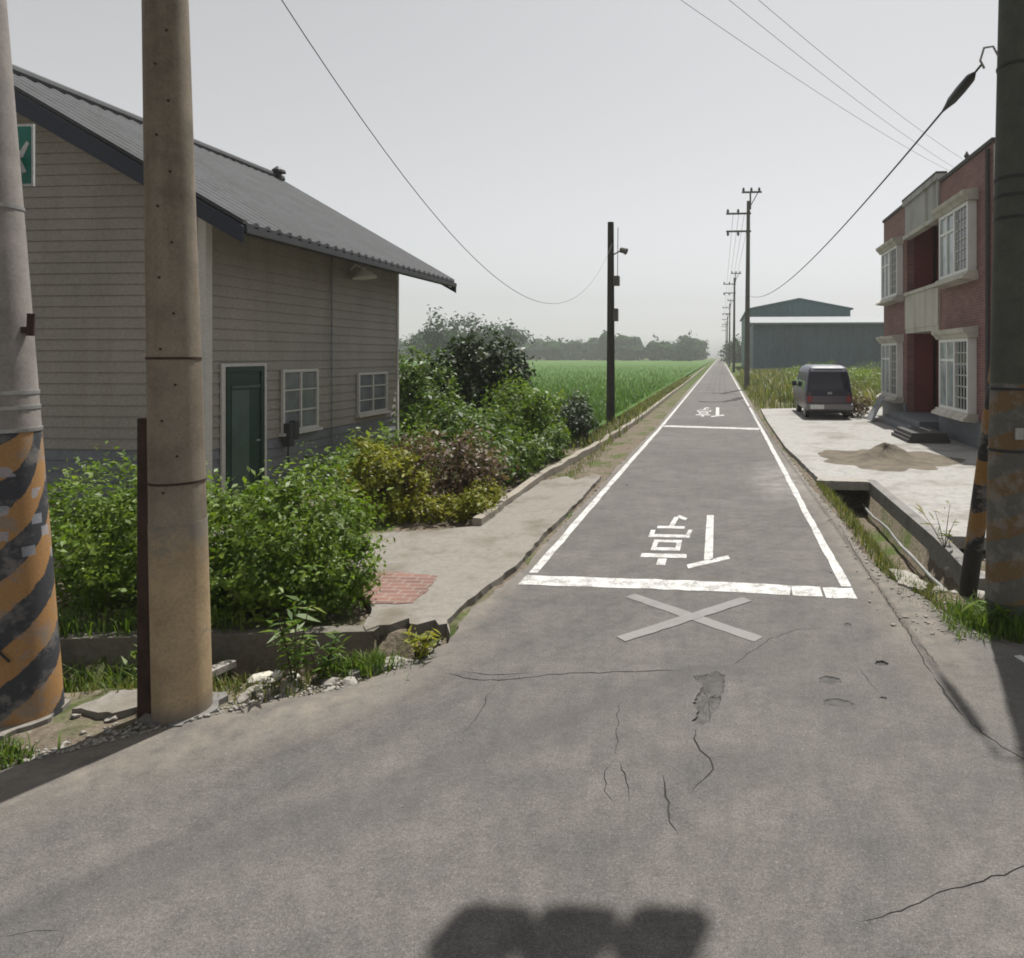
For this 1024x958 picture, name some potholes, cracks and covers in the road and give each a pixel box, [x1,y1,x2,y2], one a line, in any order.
pothole [693,671,725,726]
crack [604,705,654,804]
crack [447,670,672,734]
crack [865,866,1024,921]
crack [663,730,721,834]
pothole [823,698,854,707]
pothole [819,676,842,684]
